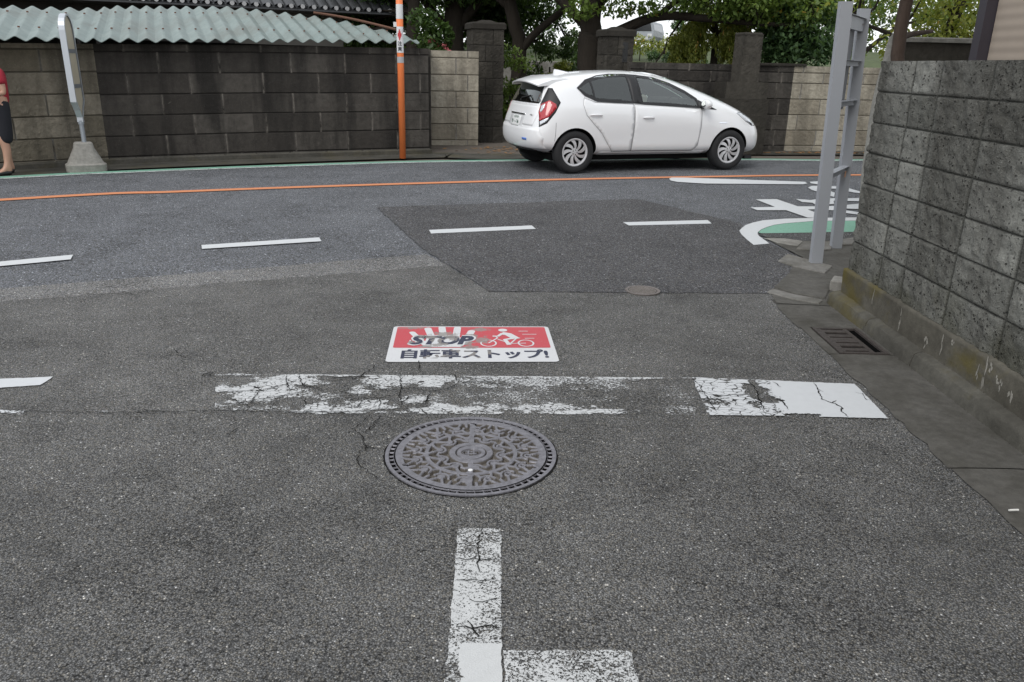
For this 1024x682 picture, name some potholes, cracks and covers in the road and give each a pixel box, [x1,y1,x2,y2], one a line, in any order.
manhole cover [625,285,660,296]
crack [462,621,502,636]
crack [226,361,517,479]
drain grate [811,327,890,355]
crack [692,378,788,411]
manhole cover [383,417,558,498]
crack [459,528,498,581]
